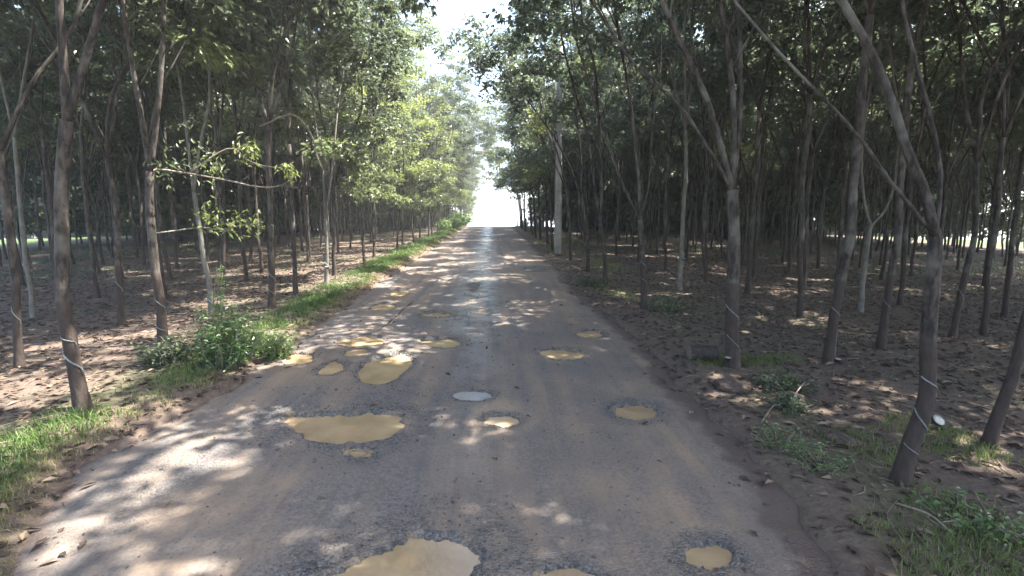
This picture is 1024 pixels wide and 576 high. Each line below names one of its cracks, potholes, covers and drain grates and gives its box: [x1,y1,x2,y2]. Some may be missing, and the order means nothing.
pothole [683,539,736,571]
pothole [340,445,377,457]
pothole [536,348,587,360]
pothole [355,350,415,385]
pothole [416,336,462,348]
pothole [279,409,406,444]
pothole [532,563,599,576]
pothole [611,402,660,420]
pothole [575,329,604,338]
pothole [282,353,315,364]
pothole [483,414,521,427]
pothole [316,529,489,576]
